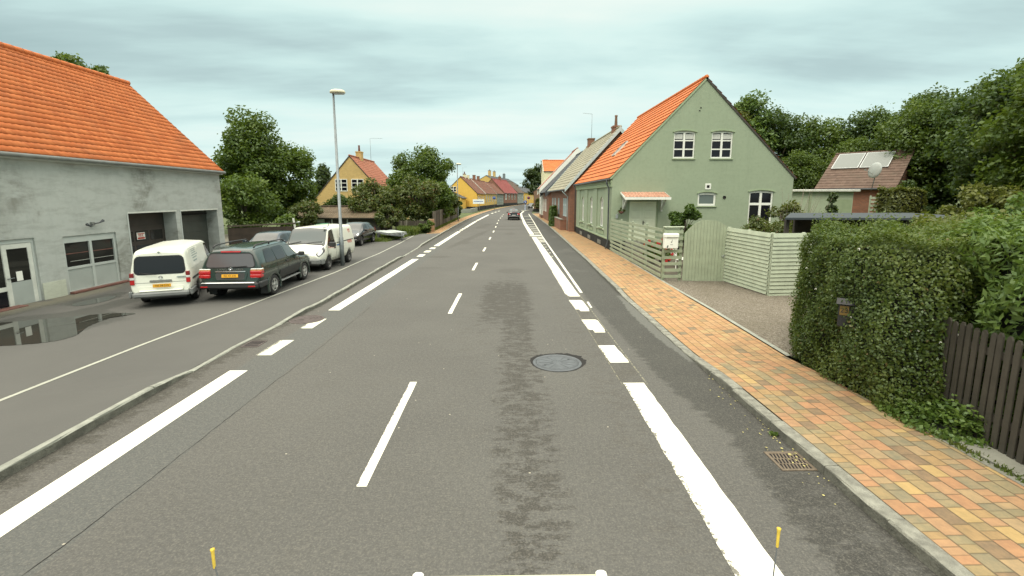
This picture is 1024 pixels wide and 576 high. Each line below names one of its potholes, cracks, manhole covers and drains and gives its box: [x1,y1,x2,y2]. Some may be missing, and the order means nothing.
drain grate [764,451,818,471]
manhole cover [530,353,587,372]
